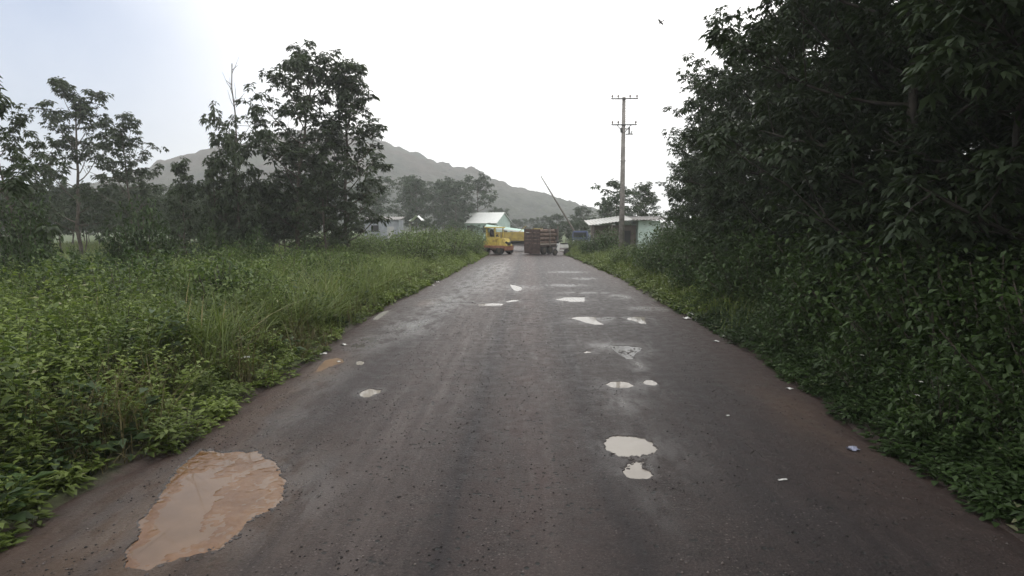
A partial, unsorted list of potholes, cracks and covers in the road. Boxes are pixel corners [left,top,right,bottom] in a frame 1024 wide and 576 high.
pothole [620,458,654,479]
pothole [609,345,642,359]
pothole [357,388,382,397]
pothole [627,316,646,324]
pothole [315,357,345,372]
pothole [122,448,289,575]
pothole [603,435,659,459]
pothole [571,316,604,325]
